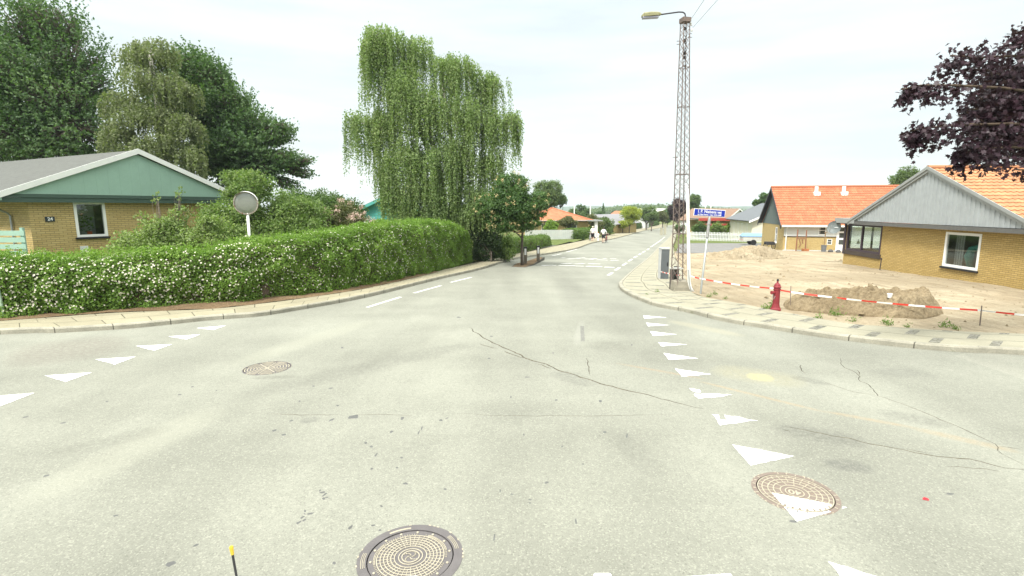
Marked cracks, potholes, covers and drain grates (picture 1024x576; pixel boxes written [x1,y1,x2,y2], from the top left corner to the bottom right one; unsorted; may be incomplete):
crack [472,329,696,408]
crack [786,359,1024,473]
manhole cover [355,525,464,576]
manhole cover [751,472,842,516]
manhole cover [242,361,292,375]
